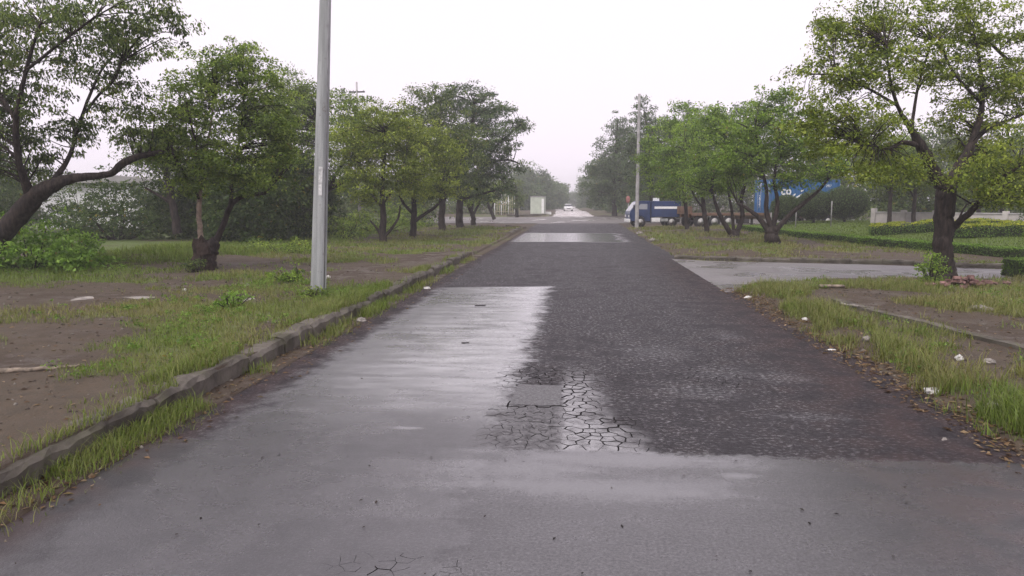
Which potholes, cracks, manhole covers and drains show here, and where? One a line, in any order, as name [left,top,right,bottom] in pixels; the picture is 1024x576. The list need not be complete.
crack [326,554,470,576]
crack [473,365,654,452]
